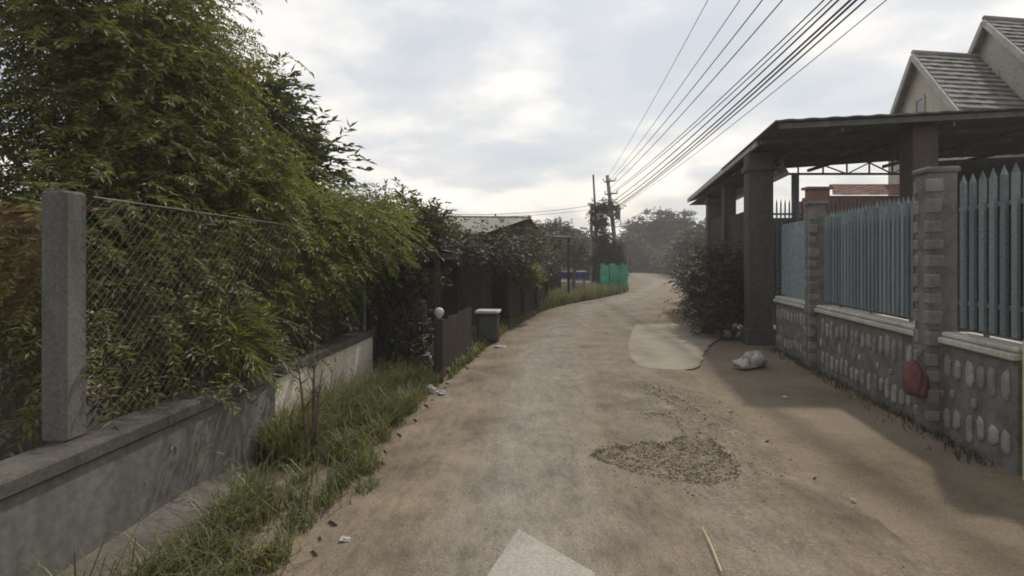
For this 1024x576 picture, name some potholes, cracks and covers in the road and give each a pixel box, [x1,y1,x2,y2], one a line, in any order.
pothole [588,384,742,486]
